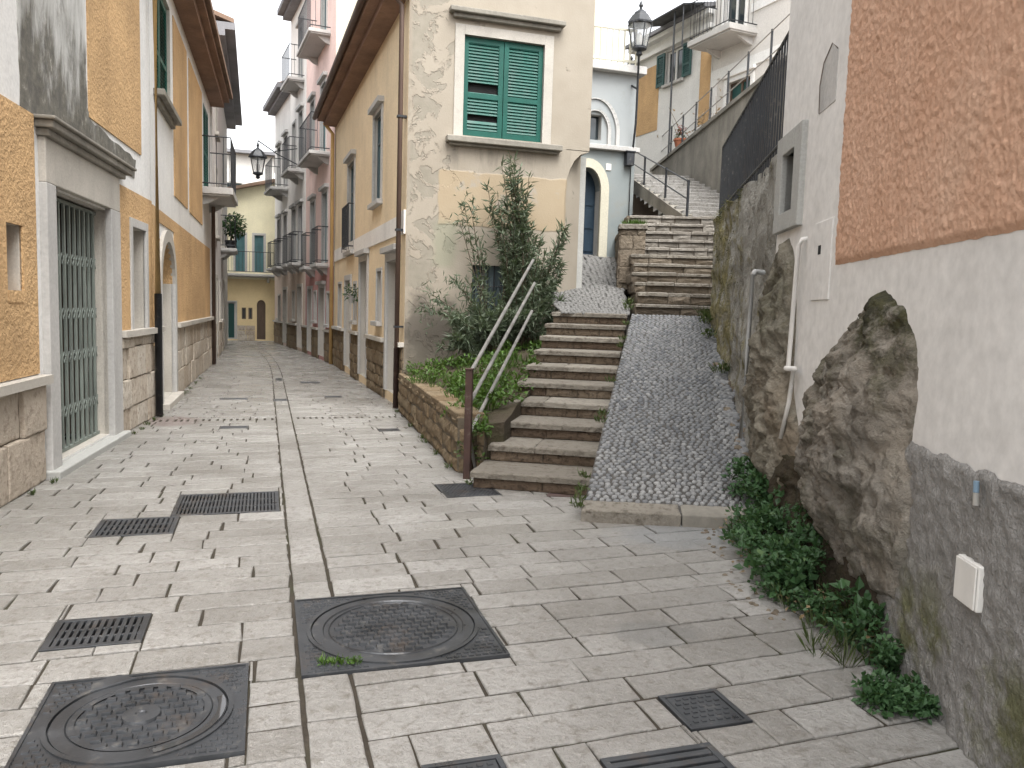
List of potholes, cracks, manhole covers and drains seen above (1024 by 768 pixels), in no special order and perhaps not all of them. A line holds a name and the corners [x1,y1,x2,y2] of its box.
drain grate [39,613,152,652]
manhole cover [294,587,510,680]
manhole cover [4,663,249,768]
drain grate [171,491,280,516]
utility cover [658,688,753,733]
drain grate [600,742,735,768]
drain grate [89,516,180,538]
